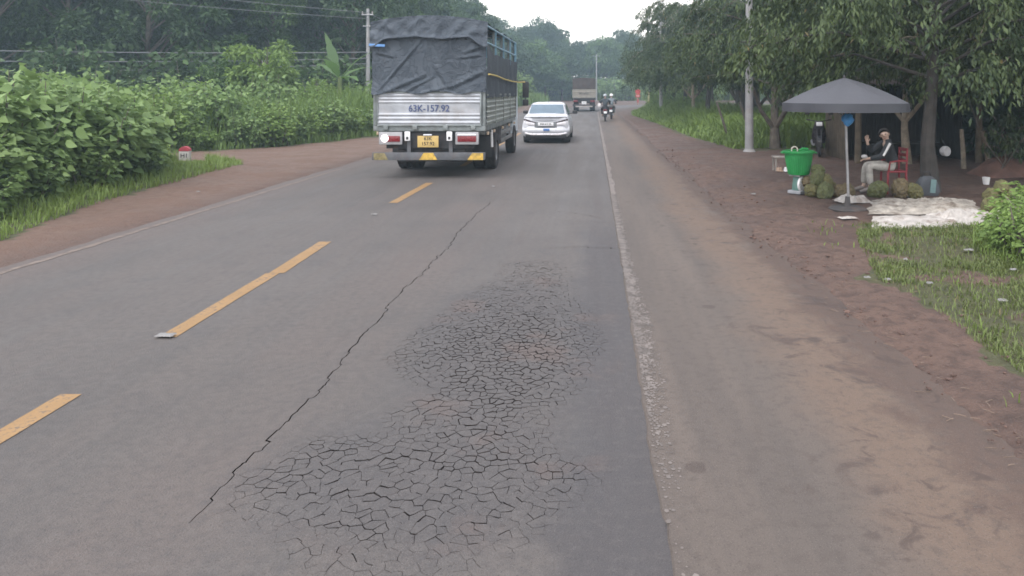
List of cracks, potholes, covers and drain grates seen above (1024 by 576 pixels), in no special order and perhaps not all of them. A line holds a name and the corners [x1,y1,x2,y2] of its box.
crack [210,210,481,503]
